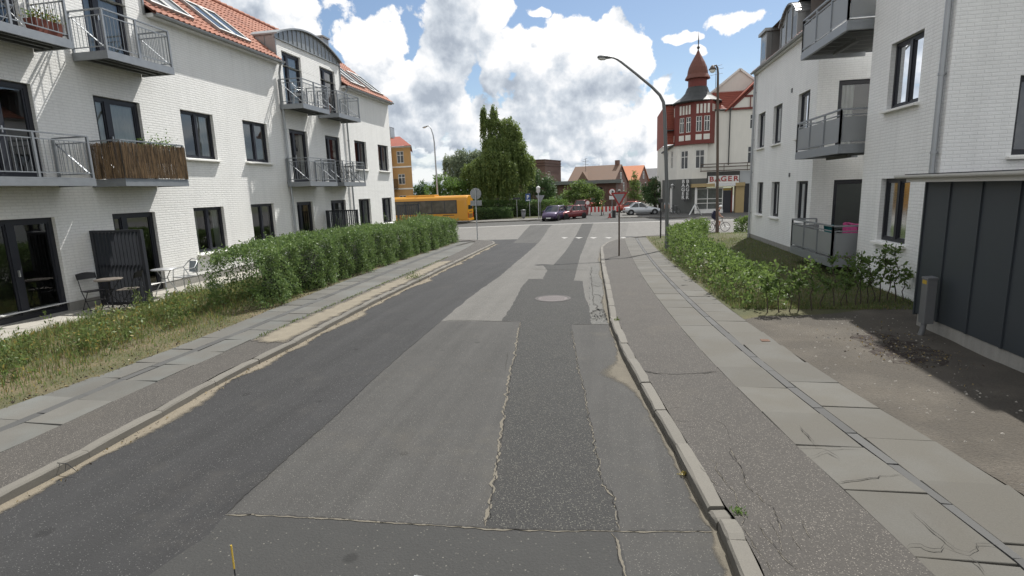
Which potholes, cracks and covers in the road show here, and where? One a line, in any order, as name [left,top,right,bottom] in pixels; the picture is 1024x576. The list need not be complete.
crack [674,396,809,572]
crack [913,513,995,571]
crack [225,322,712,576]
